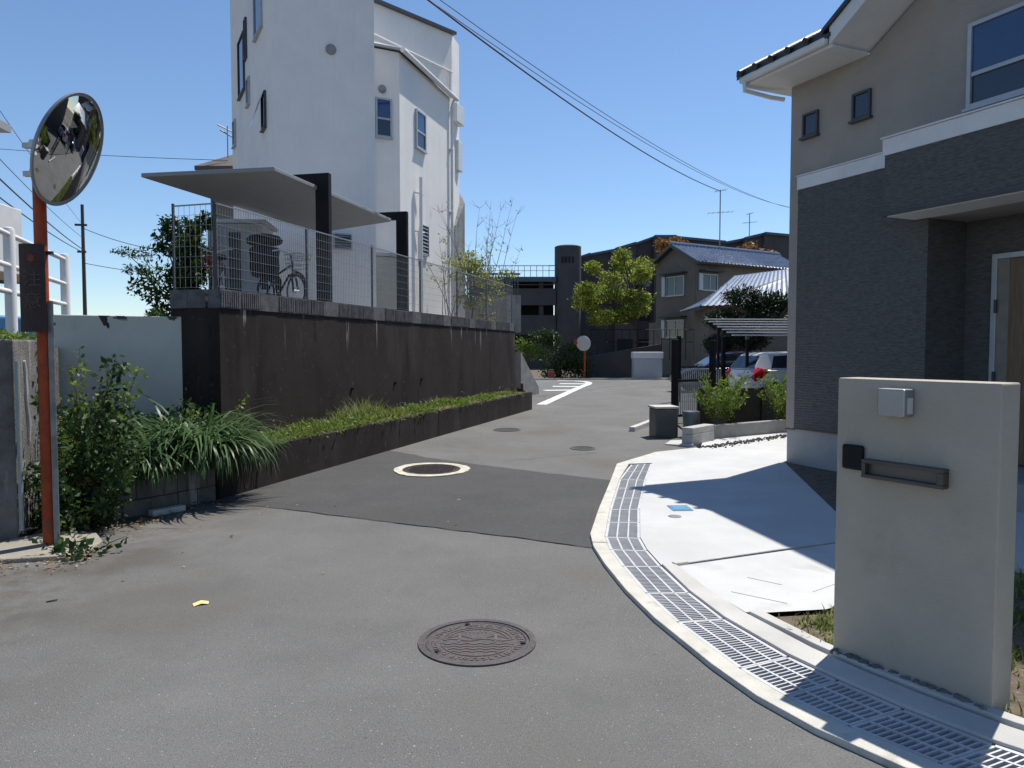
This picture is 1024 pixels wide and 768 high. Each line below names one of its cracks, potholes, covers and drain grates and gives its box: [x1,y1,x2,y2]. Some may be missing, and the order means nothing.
drain grate [851,710,992,764]
drain grate [617,479,646,488]
manhole cover [418,619,536,667]
drain grate [626,464,652,472]
drain grate [614,488,644,498]
drain grate [942,745,1024,768]
drain grate [610,550,661,567]
drain grate [741,657,836,696]
drain grate [610,498,642,509]
manhole cover [393,463,470,477]
drain grate [623,566,689,593]
drain grate [605,522,640,538]
